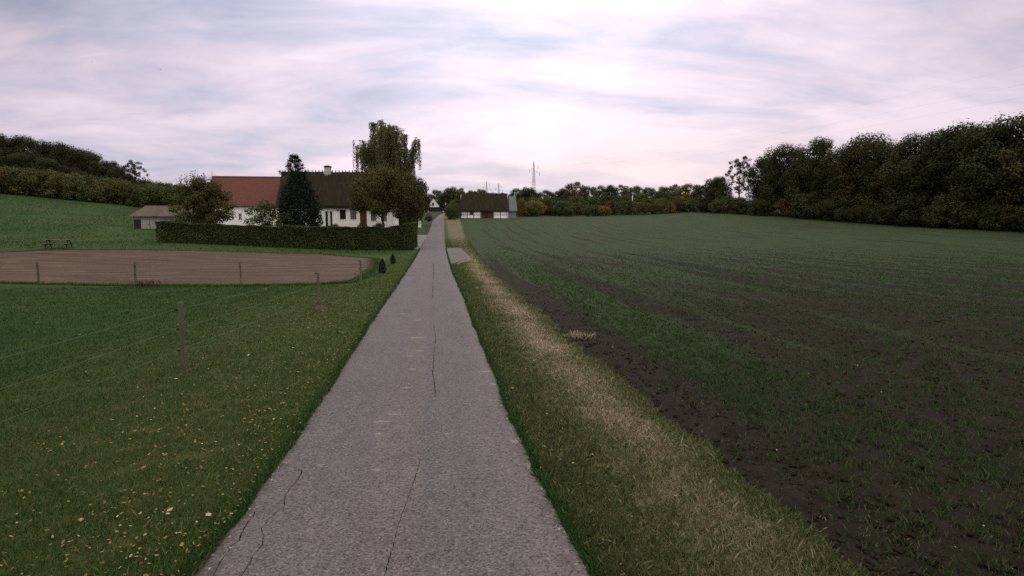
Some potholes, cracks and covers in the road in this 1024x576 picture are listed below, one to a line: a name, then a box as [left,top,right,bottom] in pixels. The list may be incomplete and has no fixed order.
crack [384,458,421,576]
crack [213,465,302,576]
